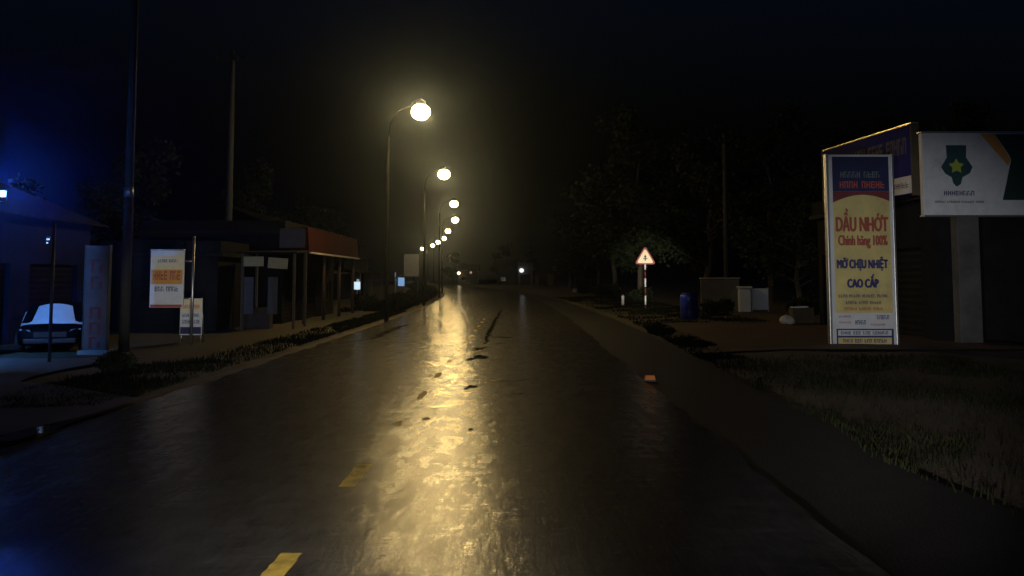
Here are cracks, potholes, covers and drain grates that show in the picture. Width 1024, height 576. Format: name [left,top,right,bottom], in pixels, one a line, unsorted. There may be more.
crack [483,309,511,344]
